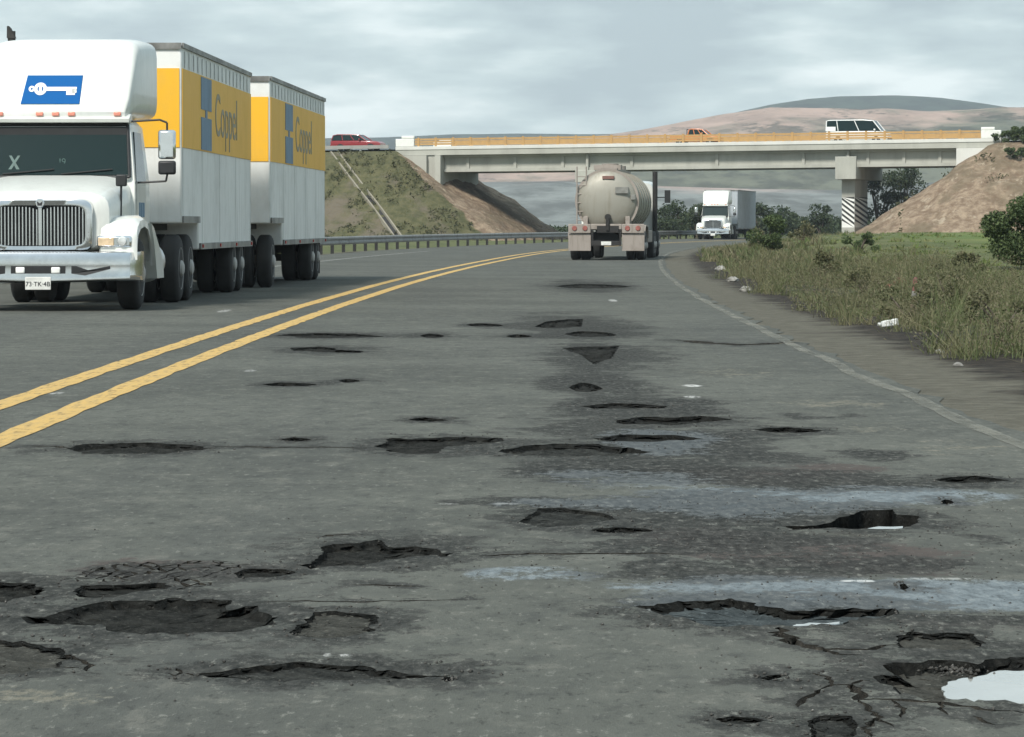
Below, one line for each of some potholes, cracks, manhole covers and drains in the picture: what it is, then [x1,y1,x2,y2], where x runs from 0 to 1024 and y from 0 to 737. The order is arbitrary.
pothole [67,443,208,454]
crack [770,628,899,655]
pothole [301,540,452,569]
pothole [199,662,443,682]
pothole [290,611,379,638]
pothole [570,383,603,392]
pothole [616,416,731,425]
pothole [563,346,620,364]
pothole [22,598,277,635]
pothole [0,640,72,674]
crack [796,673,1021,737]
pothole [499,444,649,457]
